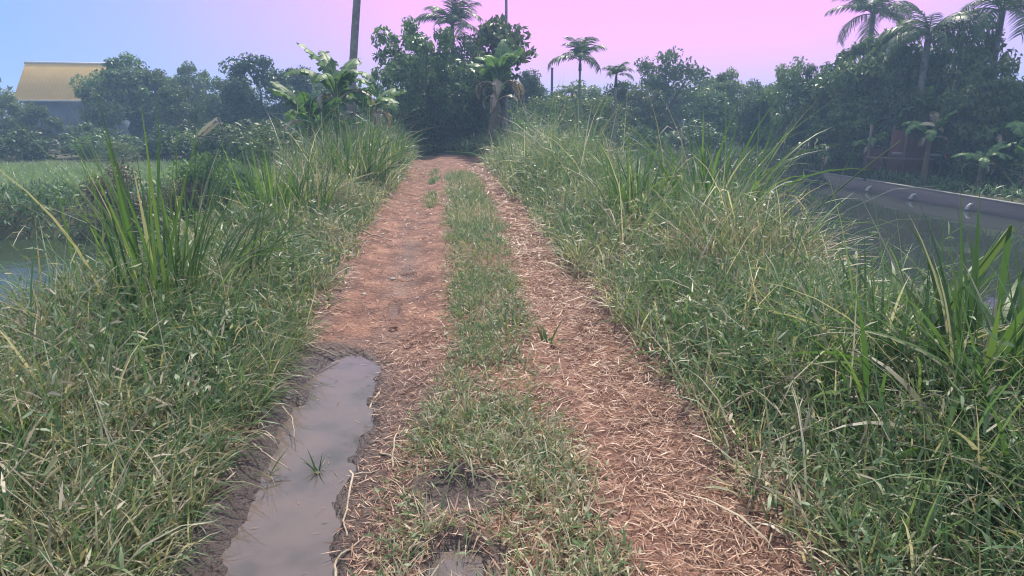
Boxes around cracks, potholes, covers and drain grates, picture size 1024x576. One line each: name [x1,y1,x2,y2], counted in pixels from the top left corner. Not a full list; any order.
pothole [143,342,394,576]
pothole [409,527,510,576]
